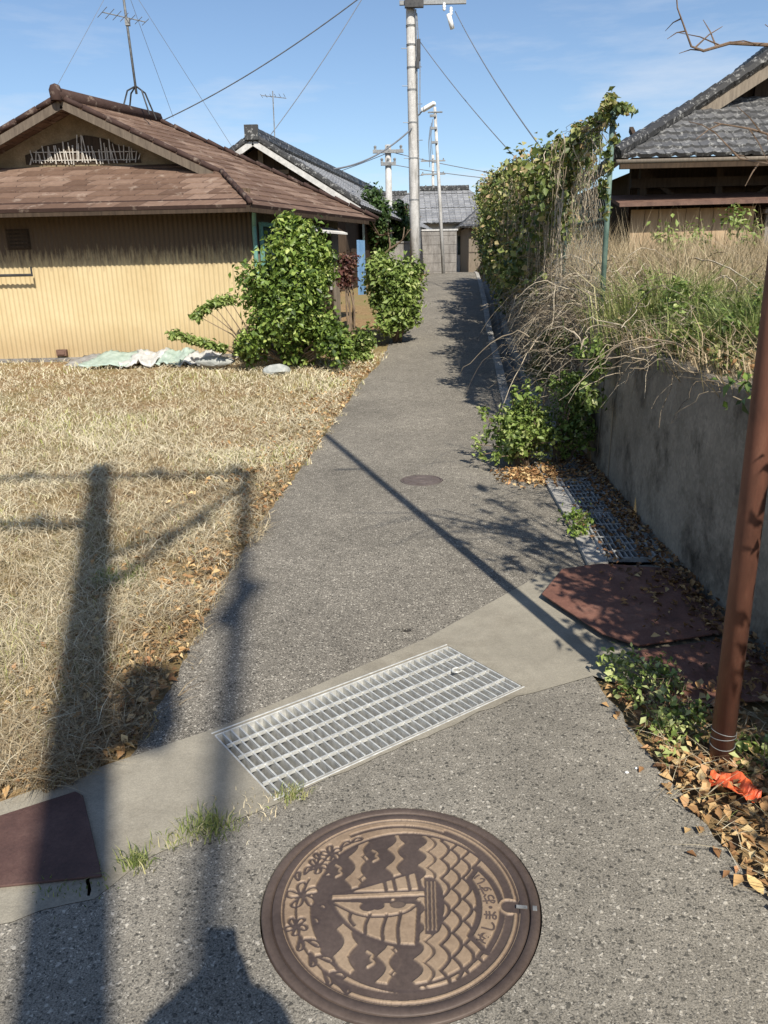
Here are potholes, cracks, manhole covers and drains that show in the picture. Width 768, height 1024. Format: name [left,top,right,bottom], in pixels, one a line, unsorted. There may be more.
manhole cover [401,475,442,486]
drain grate [583,511,658,562]
manhole cover [261,808,541,1024]
drain grate [559,477,619,512]
drain grate [211,644,525,800]
